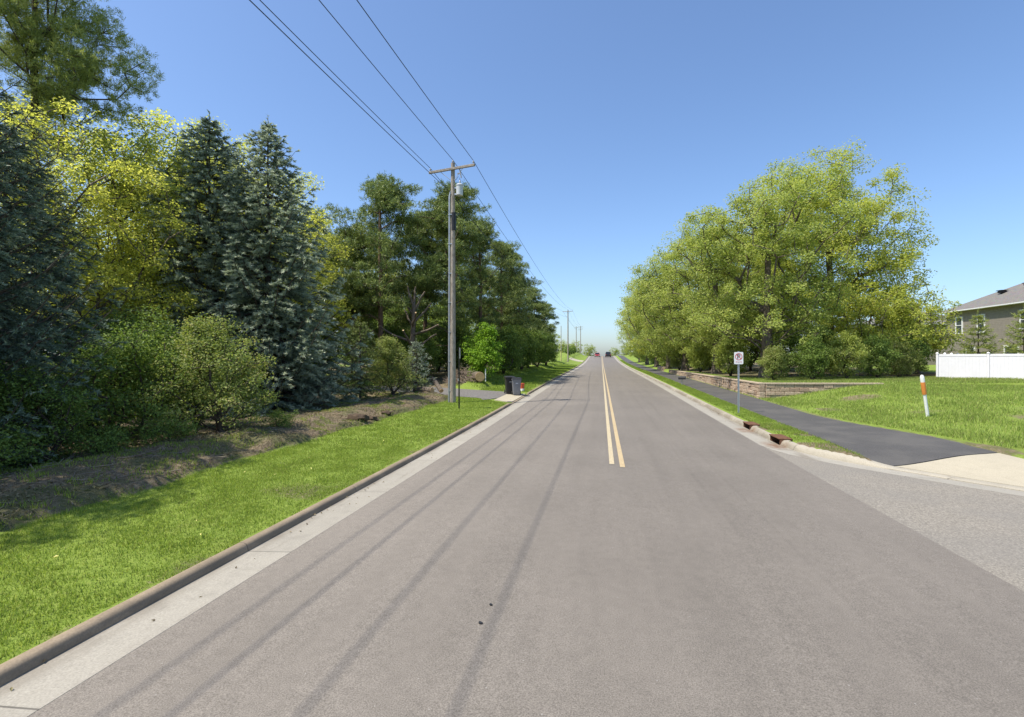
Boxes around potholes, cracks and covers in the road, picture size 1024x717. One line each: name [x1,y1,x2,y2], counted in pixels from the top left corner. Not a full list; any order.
drain grate [769,434,793,445]
